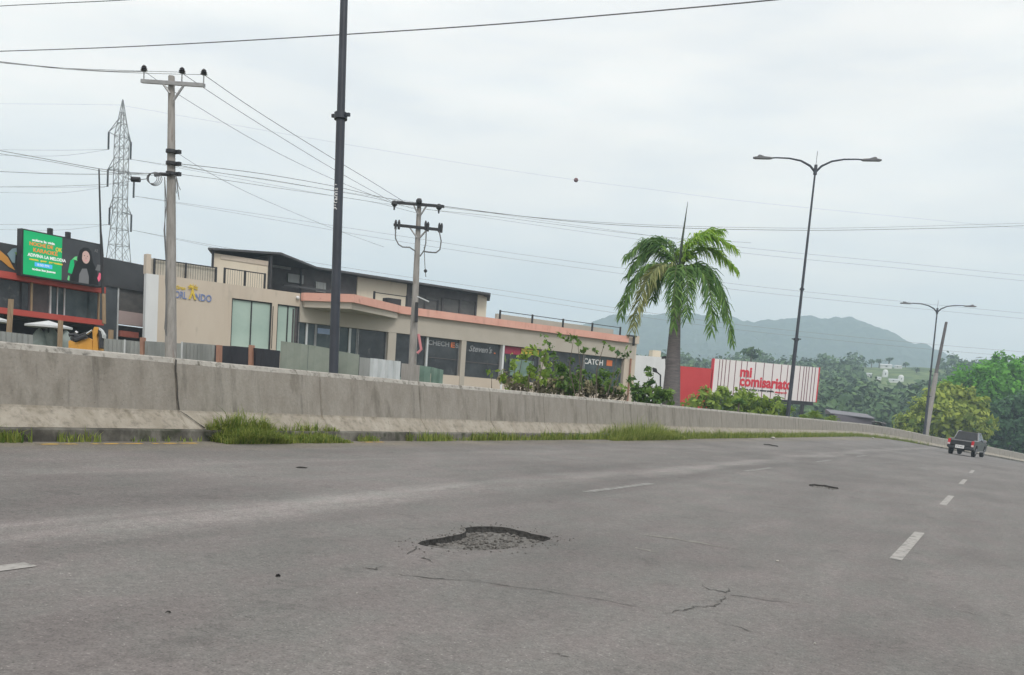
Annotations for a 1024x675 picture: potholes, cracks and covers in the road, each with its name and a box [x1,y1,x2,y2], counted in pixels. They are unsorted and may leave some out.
pothole [418,526,550,550]
crack [672,584,799,632]
crack [346,546,644,608]
